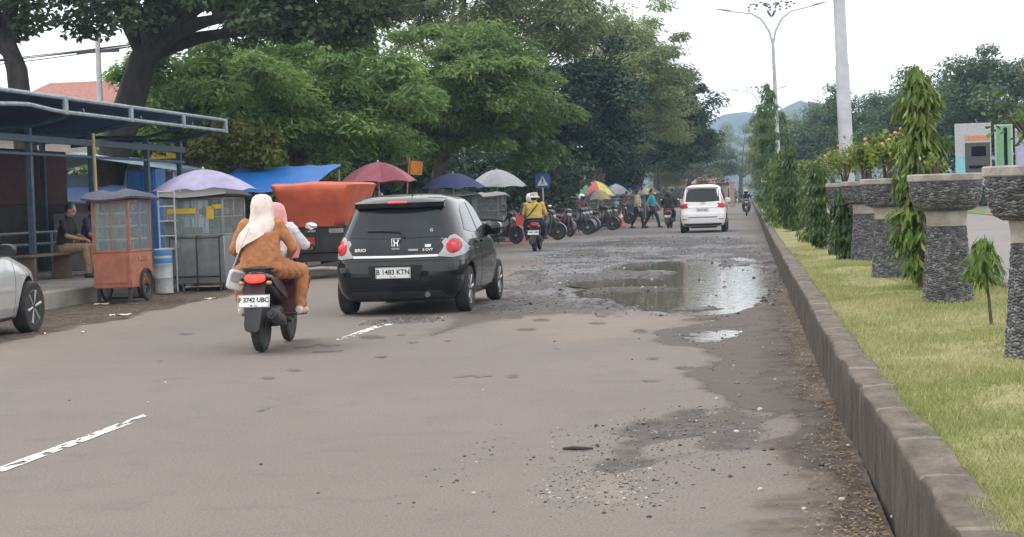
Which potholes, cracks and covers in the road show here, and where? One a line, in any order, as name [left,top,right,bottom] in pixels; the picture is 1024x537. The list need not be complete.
pothole [597,408,724,473]
pothole [676,325,756,345]
pothole [557,265,779,316]
pothole [362,316,449,325]
pothole [611,259,727,271]
